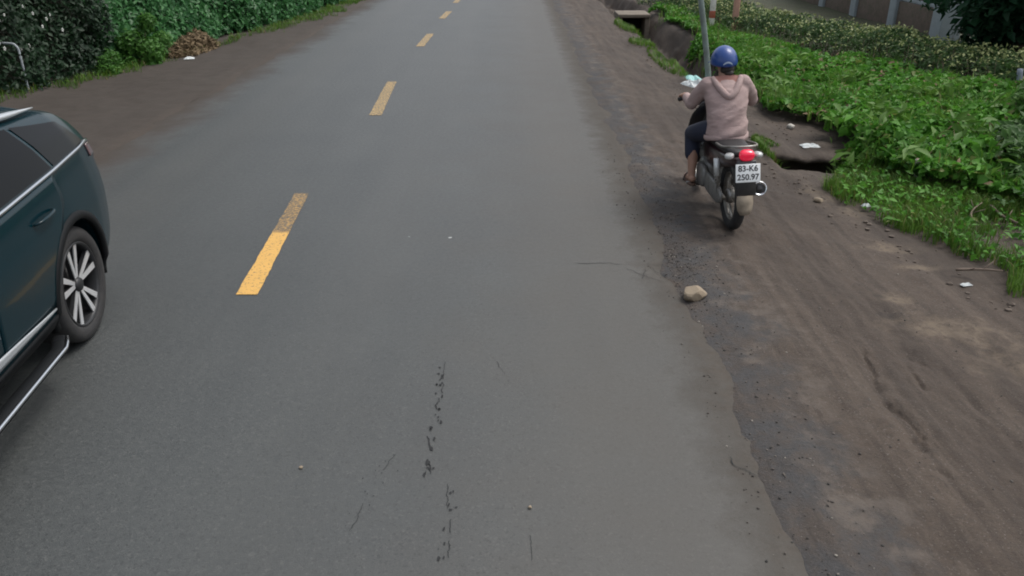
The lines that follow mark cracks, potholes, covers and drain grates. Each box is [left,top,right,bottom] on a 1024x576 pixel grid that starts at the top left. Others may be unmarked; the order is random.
crack [423,361,458,561]
